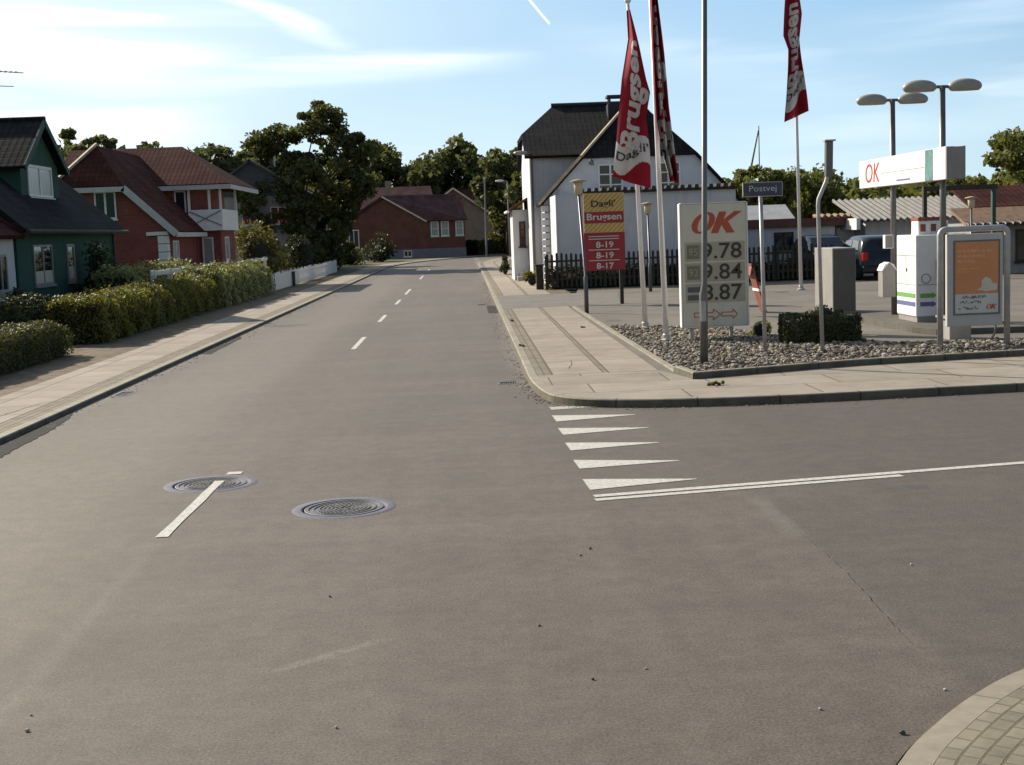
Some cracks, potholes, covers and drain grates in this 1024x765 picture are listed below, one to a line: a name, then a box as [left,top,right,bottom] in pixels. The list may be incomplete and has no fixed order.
manhole cover [163,475,258,493]
manhole cover [292,497,396,519]
